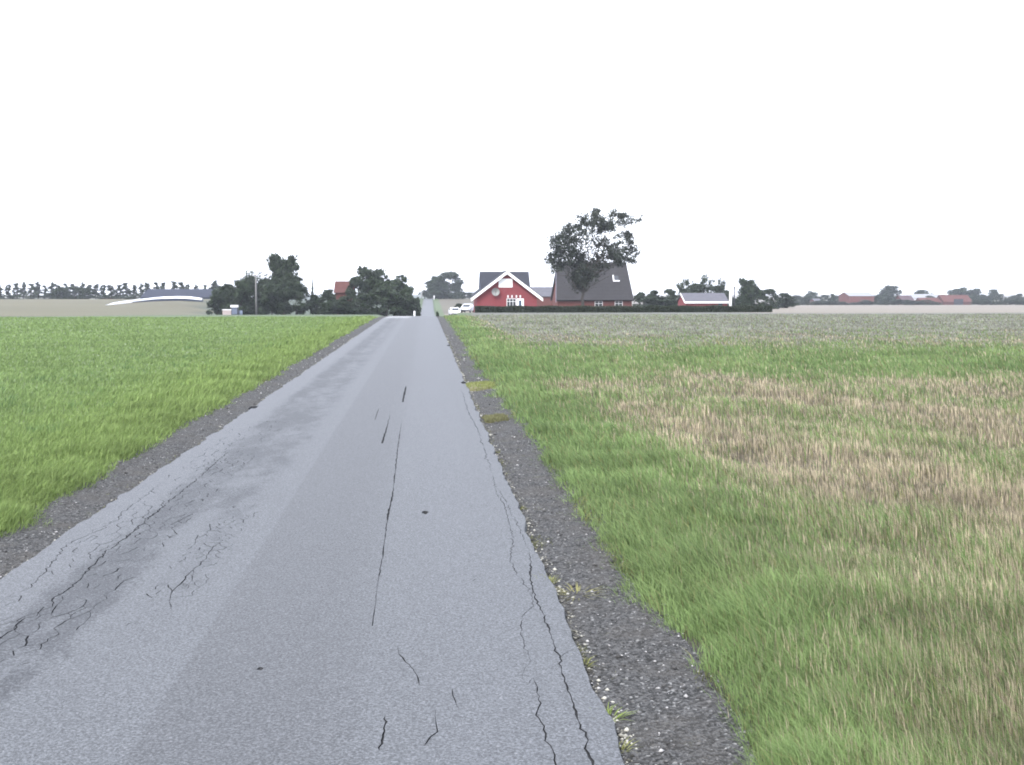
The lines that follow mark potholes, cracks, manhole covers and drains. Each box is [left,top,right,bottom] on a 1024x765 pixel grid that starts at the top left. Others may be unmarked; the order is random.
crack [378,717,387,751]
crack [0,426,278,666]
crack [463,396,594,765]
crack [424,690,457,746]
